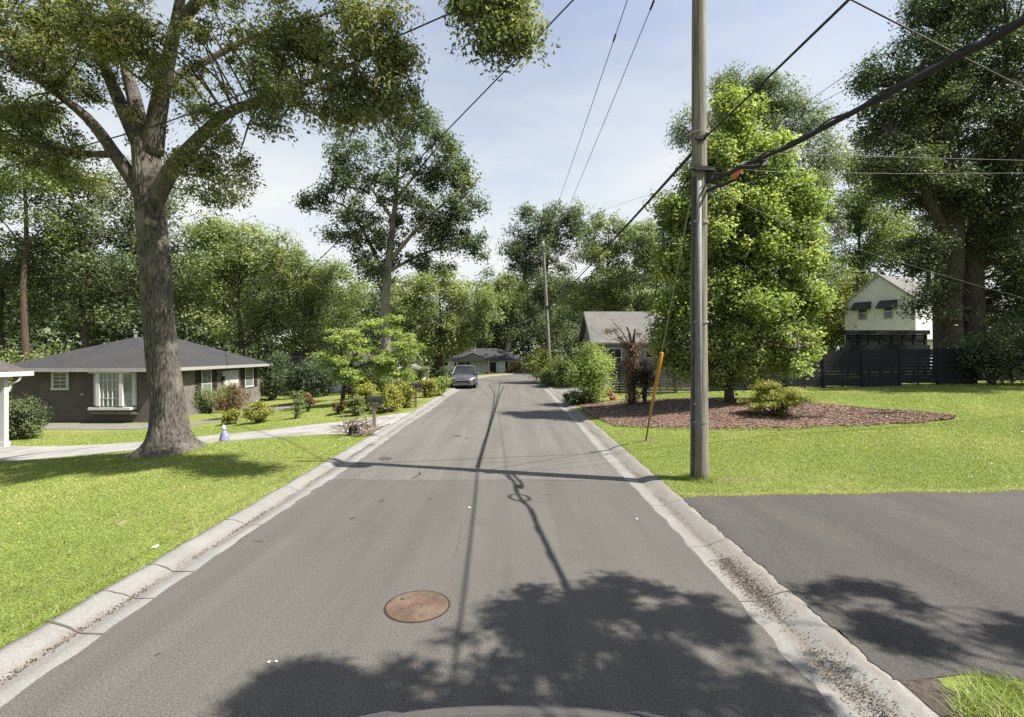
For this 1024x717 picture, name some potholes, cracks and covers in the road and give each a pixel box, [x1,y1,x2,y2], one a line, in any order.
manhole cover [384,590,450,623]
